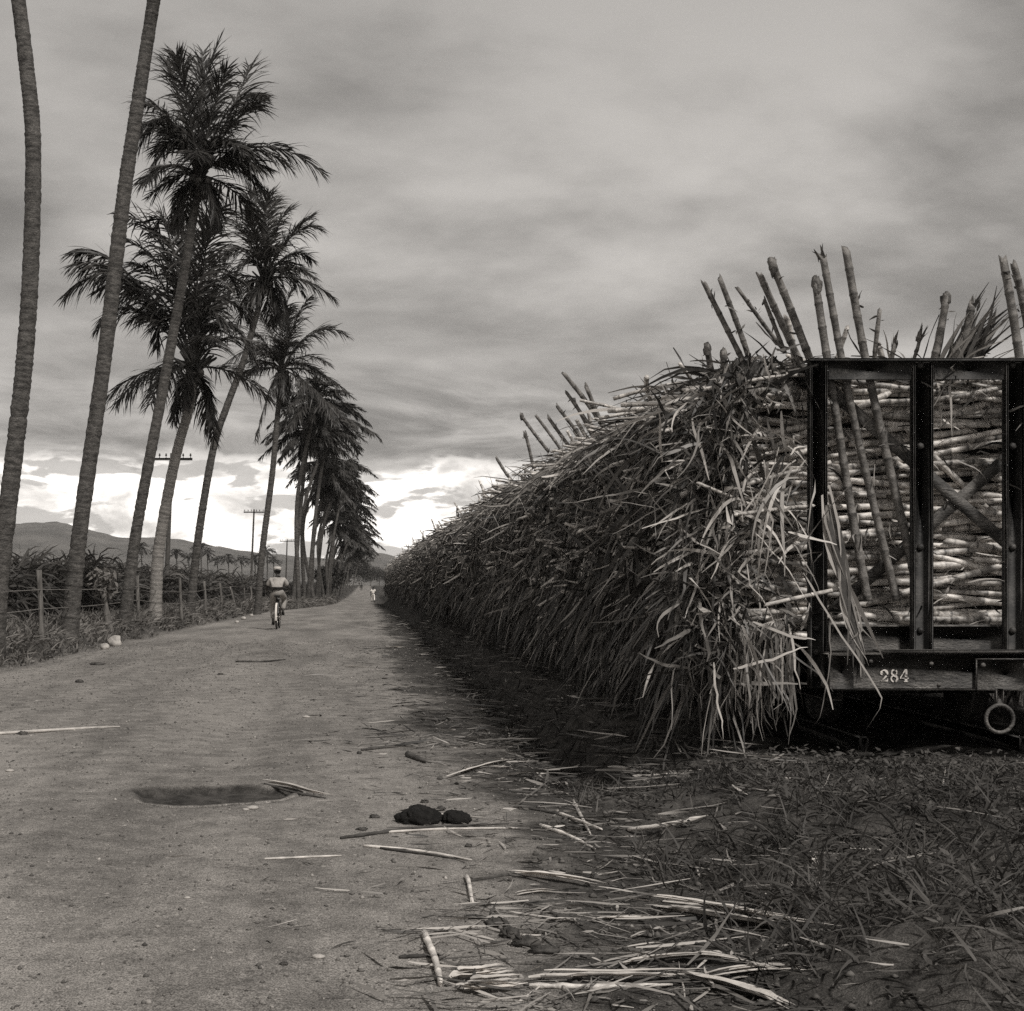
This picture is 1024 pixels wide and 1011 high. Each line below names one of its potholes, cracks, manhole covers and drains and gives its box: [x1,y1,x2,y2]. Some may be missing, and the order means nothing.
pothole [123,784,306,808]
